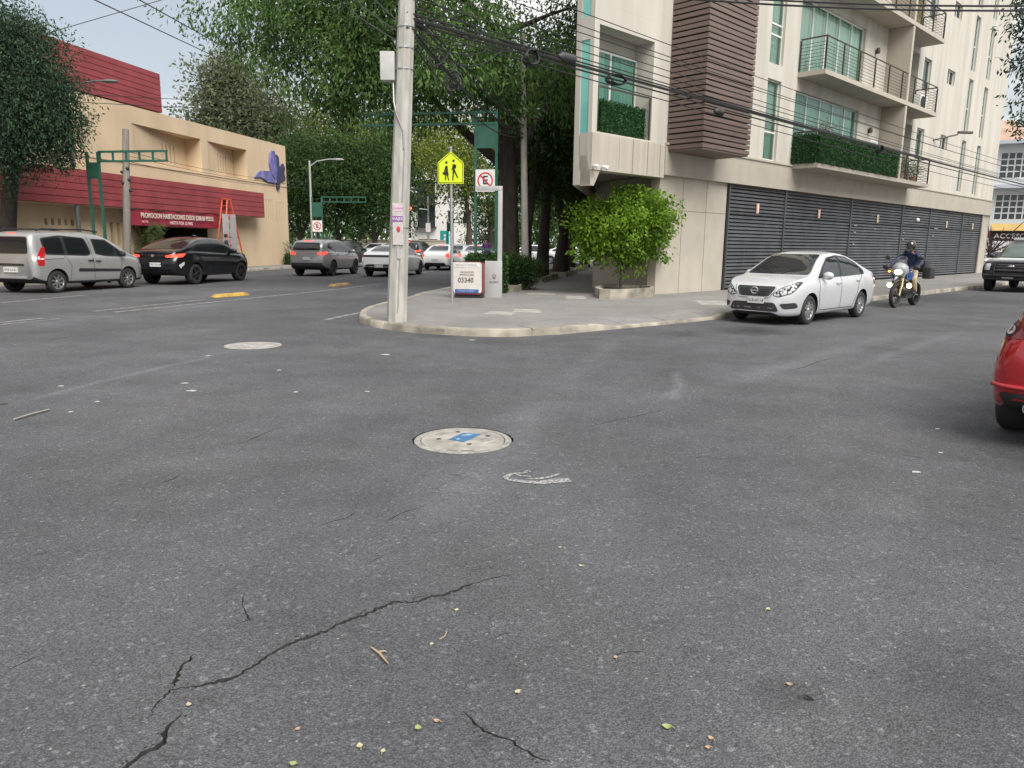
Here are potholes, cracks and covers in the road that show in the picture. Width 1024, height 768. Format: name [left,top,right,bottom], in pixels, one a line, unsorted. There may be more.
crack [121,575,510,768]
manhole cover [412,428,513,454]
crack [463,711,552,763]
